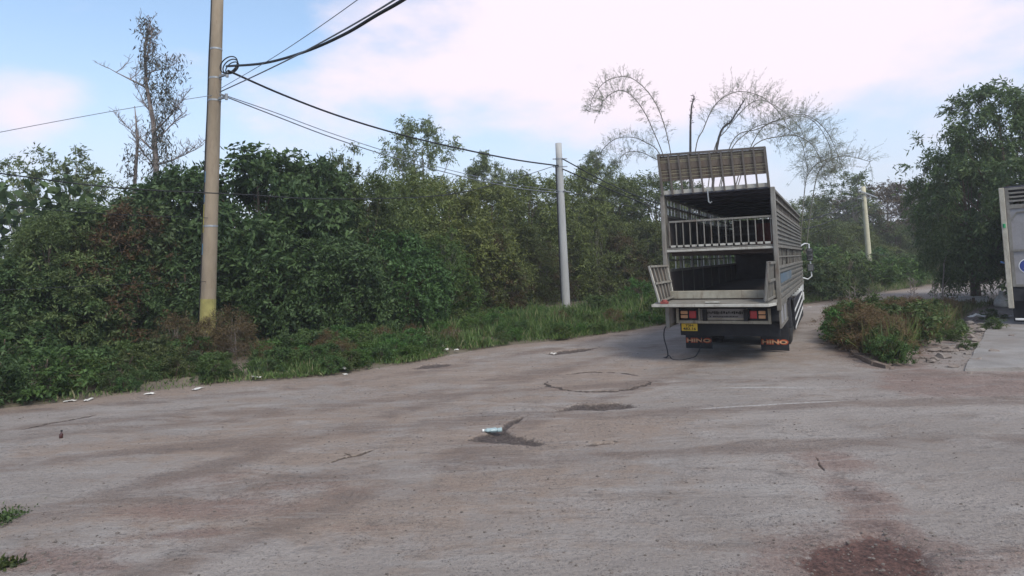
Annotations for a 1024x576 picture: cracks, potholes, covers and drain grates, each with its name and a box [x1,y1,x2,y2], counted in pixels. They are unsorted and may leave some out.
pothole [551,402,641,412]
crack [22,415,95,430]
crack [327,450,374,464]
pothole [464,415,547,447]
crack [543,371,652,393]
